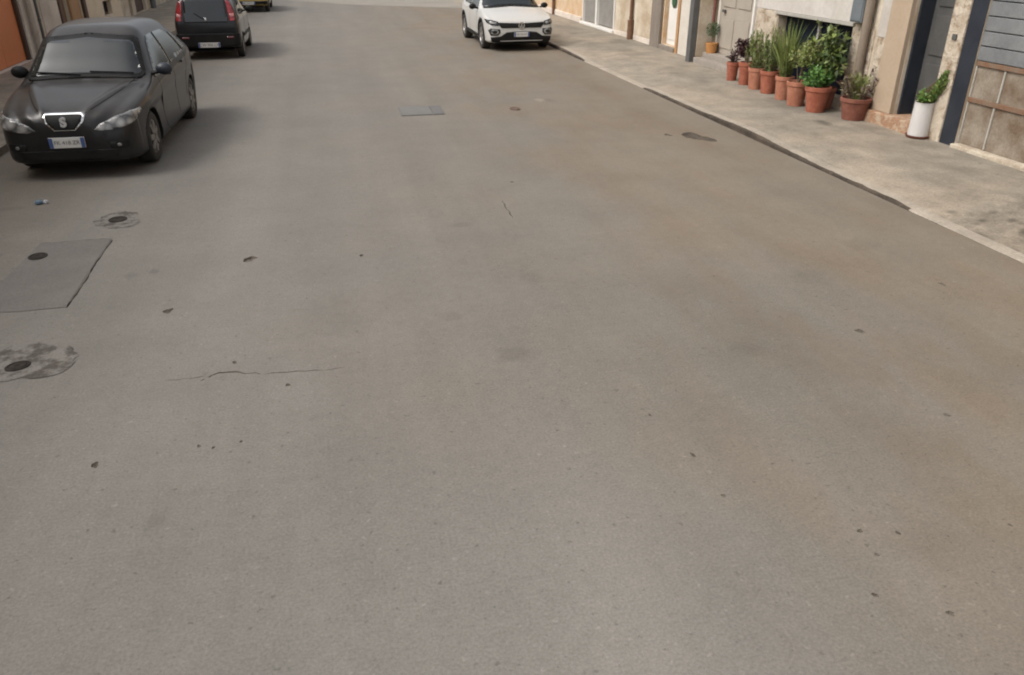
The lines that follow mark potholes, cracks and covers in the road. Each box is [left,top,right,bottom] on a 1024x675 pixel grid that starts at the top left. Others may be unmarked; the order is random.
manhole cover [0,342,79,381]
manhole cover [93,211,140,228]
manhole cover [28,252,48,260]
crack [179,367,343,381]
